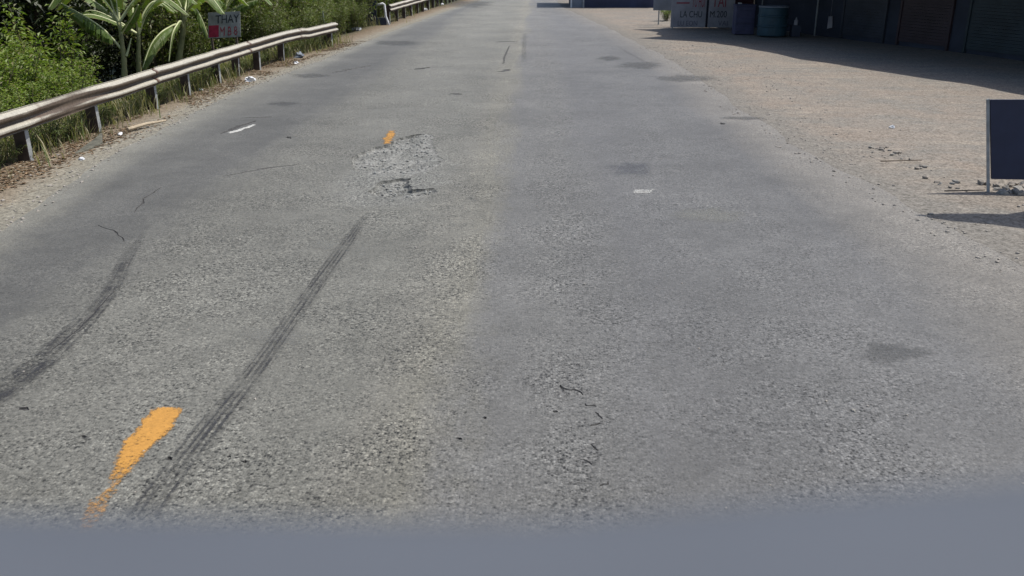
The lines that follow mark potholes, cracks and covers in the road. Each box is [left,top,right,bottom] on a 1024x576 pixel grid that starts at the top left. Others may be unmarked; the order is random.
pothole [367,178,437,198]
crack [225,164,297,176]
crack [560,385,603,426]
pothole [350,134,443,177]
